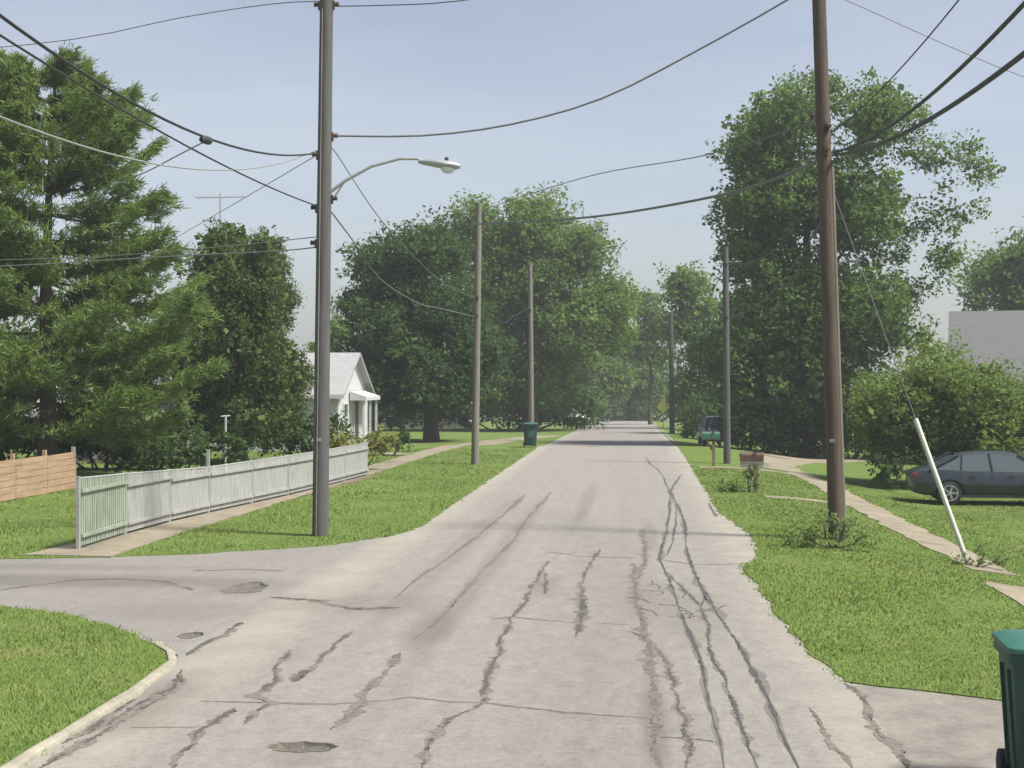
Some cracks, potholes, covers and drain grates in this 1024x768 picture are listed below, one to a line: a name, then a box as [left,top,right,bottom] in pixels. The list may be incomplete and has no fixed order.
pothole [268,741,337,753]
crack [809,707,853,768]
pothole [221,581,269,593]
crack [39,491,725,768]
